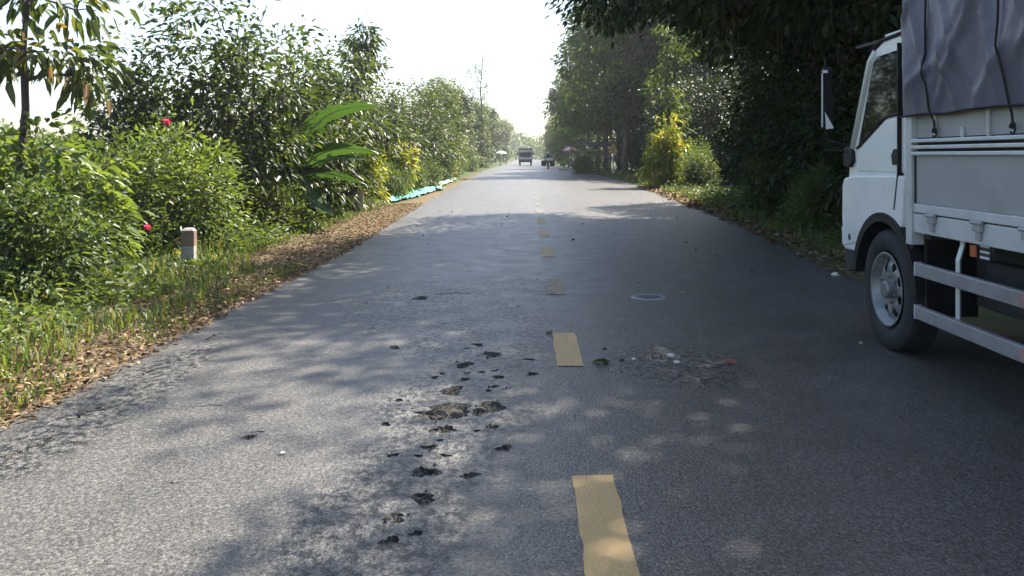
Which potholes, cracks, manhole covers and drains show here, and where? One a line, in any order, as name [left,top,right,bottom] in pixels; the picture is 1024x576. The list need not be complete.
pothole [407,402,478,423]
pothole [381,512,412,524]
pothole [411,463,442,477]
pothole [439,386,463,395]
pothole [464,399,507,416]
pothole [408,490,438,506]
